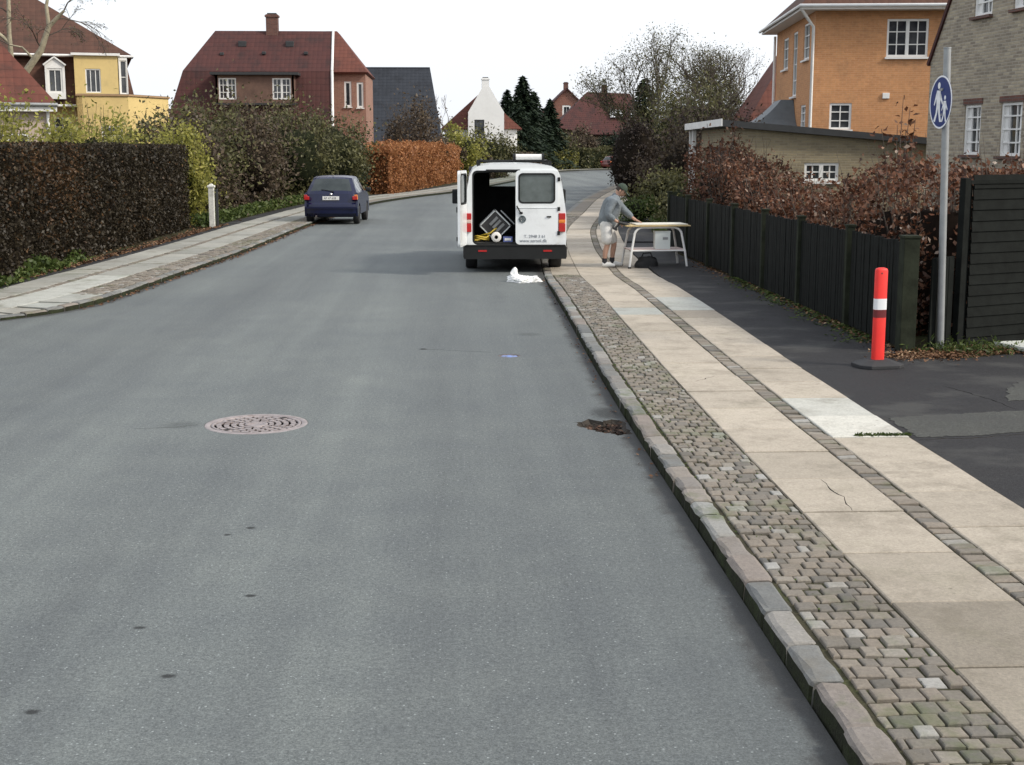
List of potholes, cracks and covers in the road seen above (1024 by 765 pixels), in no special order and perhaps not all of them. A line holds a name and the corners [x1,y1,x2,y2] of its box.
pothole [574,419,632,435]
manhole cover [204,414,308,434]
